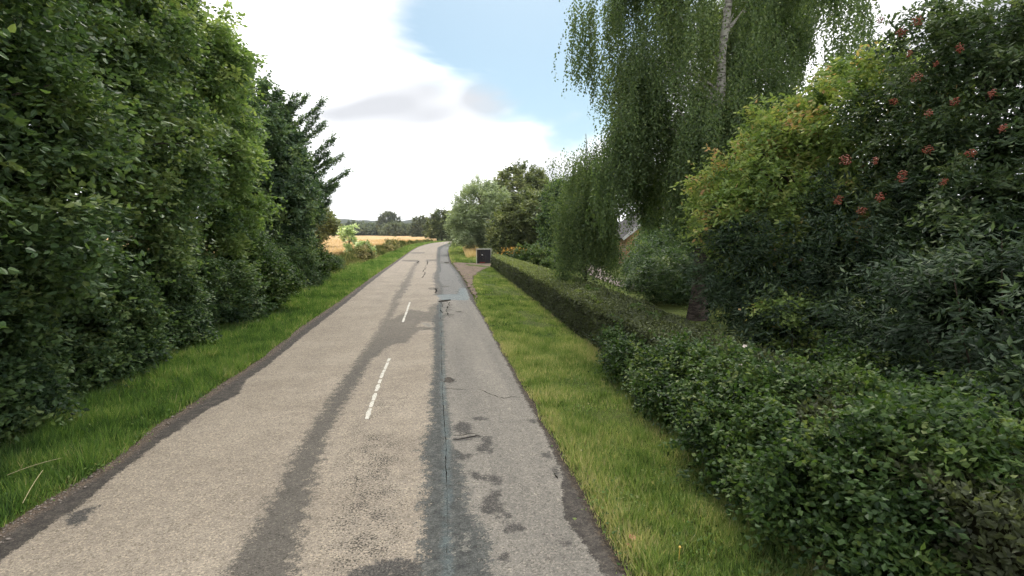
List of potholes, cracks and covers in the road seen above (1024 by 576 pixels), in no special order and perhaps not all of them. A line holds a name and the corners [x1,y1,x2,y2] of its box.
crack [417,262,521,552]
